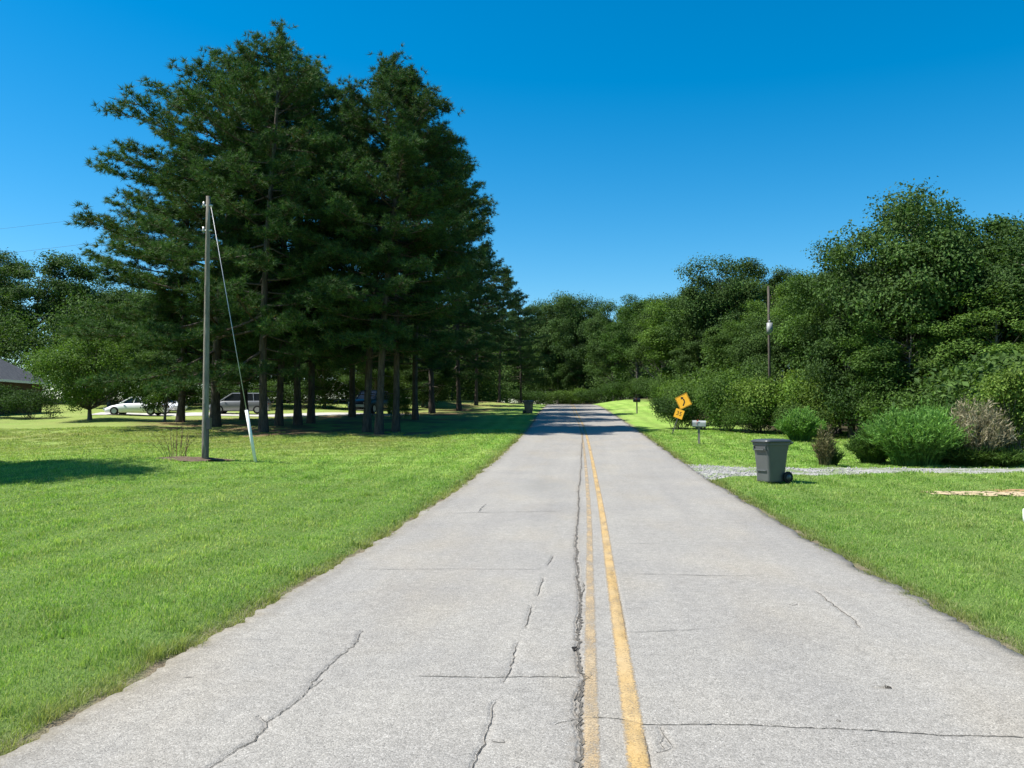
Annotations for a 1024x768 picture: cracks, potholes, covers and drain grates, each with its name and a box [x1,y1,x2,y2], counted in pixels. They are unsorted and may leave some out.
crack [210,631,363,768]
crack [425,427,1024,768]
